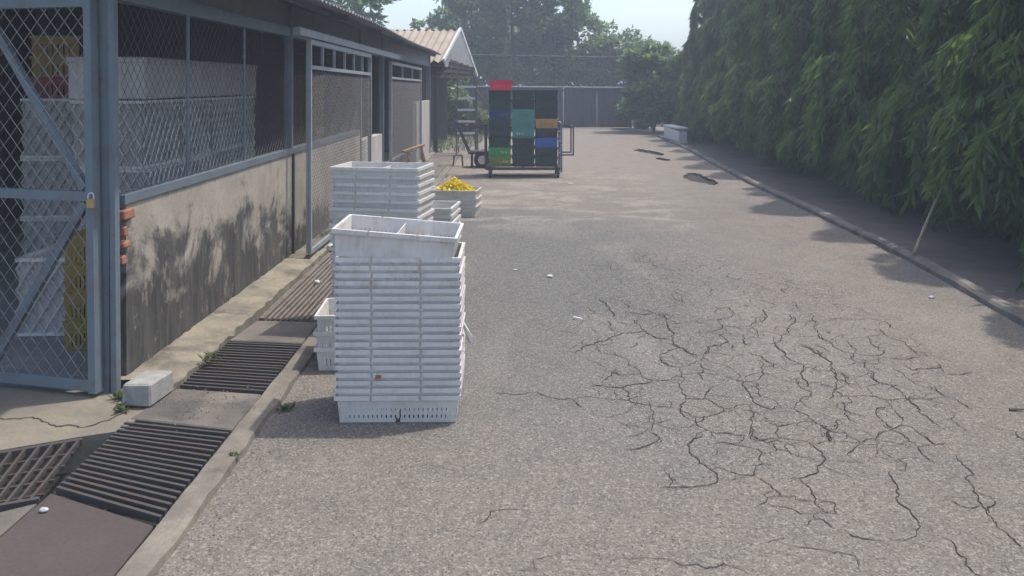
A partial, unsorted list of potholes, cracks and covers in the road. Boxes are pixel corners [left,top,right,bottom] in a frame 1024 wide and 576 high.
crack [625,556,748,574]
drain grate [0,438,83,512]
drain grate [54,421,229,528]
pothole [682,173,718,186]
drain grate [180,342,301,396]
crack [947,455,1023,548]
drain grate [259,251,333,322]
crack [0,413,123,427]
crack [941,536,979,575]
crack [497,253,978,531]
crack [762,530,882,567]
